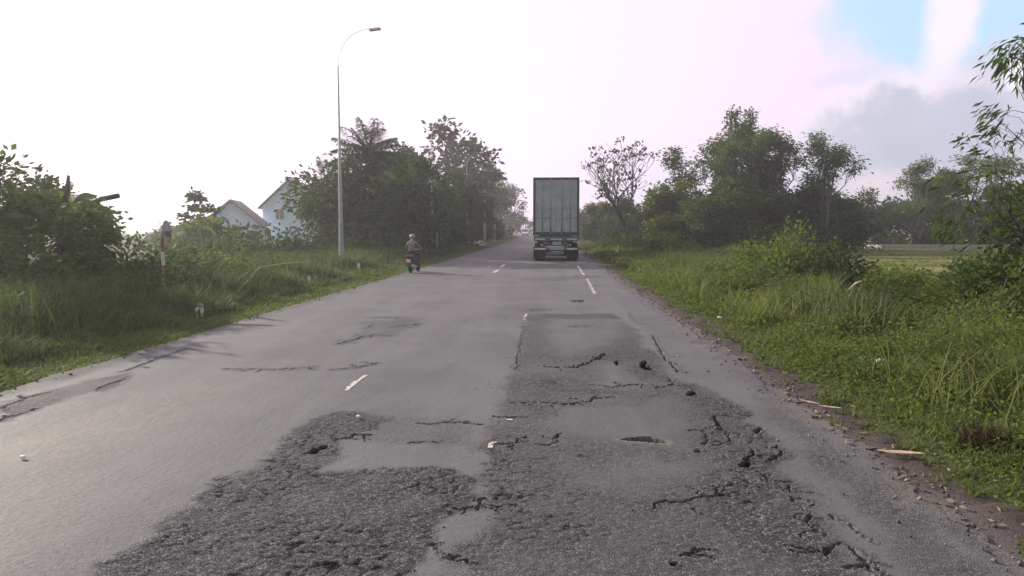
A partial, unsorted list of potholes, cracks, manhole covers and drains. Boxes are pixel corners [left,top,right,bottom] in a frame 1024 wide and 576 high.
crack [433,541,479,565]
crack [224,362,378,372]
crack [687,415,741,446]
crack [652,484,734,514]
crack [407,311,703,444]
crack [757,444,890,576]
crack [496,433,561,450]
crack [0,392,49,421]
crack [452,494,517,514]
crack [678,547,717,562]
pothole [737,448,757,468]
crack [337,317,420,345]
